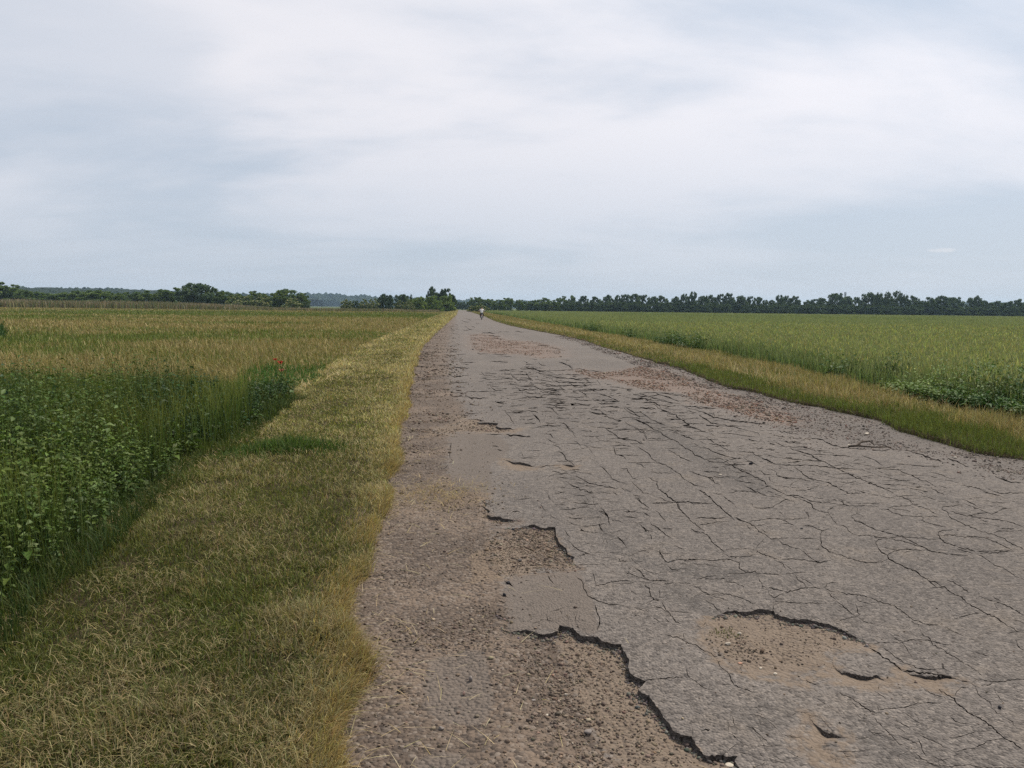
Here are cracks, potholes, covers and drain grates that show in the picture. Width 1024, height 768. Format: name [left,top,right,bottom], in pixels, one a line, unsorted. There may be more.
pothole [483,525,580,578]
crack [449,321,1024,768]
pothole [432,419,520,434]
pothole [703,609,871,684]
pothole [488,617,739,768]
